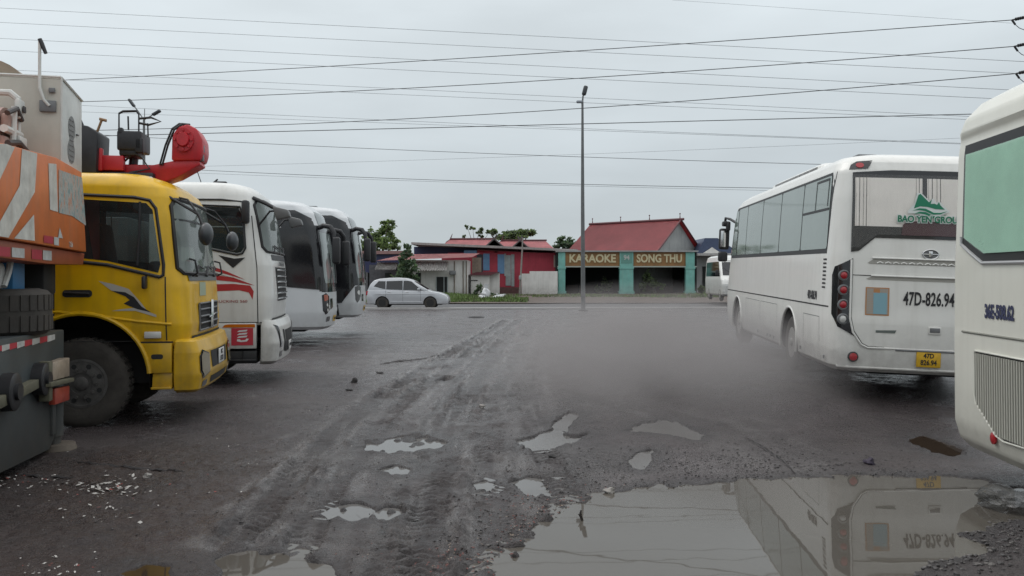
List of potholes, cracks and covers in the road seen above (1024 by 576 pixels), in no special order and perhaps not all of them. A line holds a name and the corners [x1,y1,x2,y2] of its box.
pothole [510,409,598,453]
pothole [356,431,453,454]
pothole [622,448,662,471]
pothole [503,473,591,499]
pothole [309,497,383,523]
pothole [373,463,418,477]
pothole [470,478,510,496]
